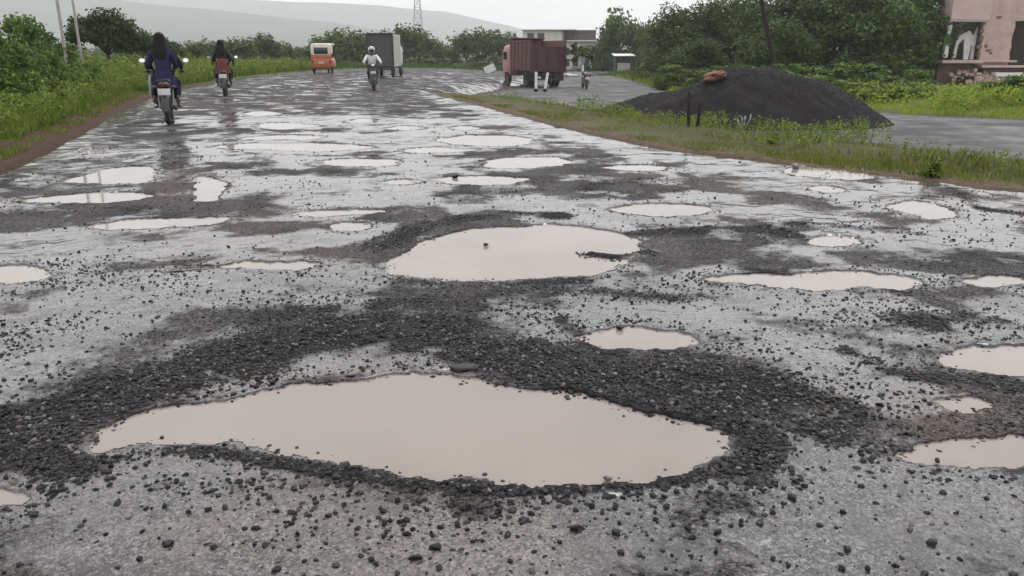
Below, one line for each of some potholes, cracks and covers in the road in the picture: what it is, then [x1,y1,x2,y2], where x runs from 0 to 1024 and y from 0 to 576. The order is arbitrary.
pothole [179,173,242,205]
pothole [0,260,70,289]
pothole [304,156,416,168]
pothole [684,266,940,296]
pothole [468,154,582,170]
pothole [867,424,1024,478]
pothole [74,214,245,234]
pothole [918,338,1024,384]
pothole [596,200,728,220]
pothole [789,231,878,251]
pothole [869,197,979,223]
